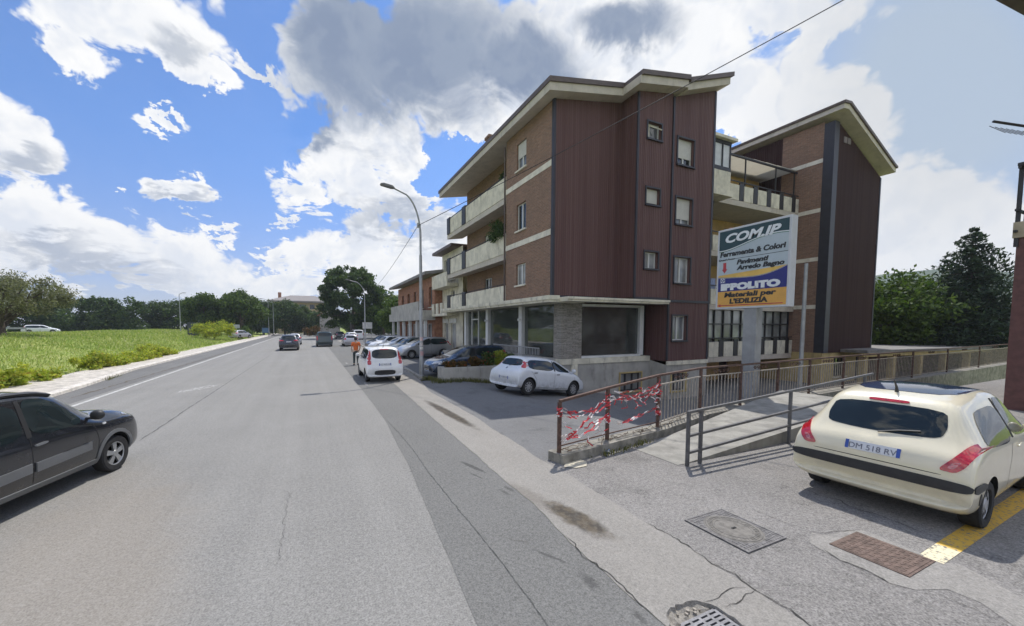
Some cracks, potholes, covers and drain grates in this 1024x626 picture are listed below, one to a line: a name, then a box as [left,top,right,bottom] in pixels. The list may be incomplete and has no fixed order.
drain grate [680,609,739,626]
manhole cover [684,509,787,554]
crack [703,587,754,605]
manhole cover [829,532,936,578]
